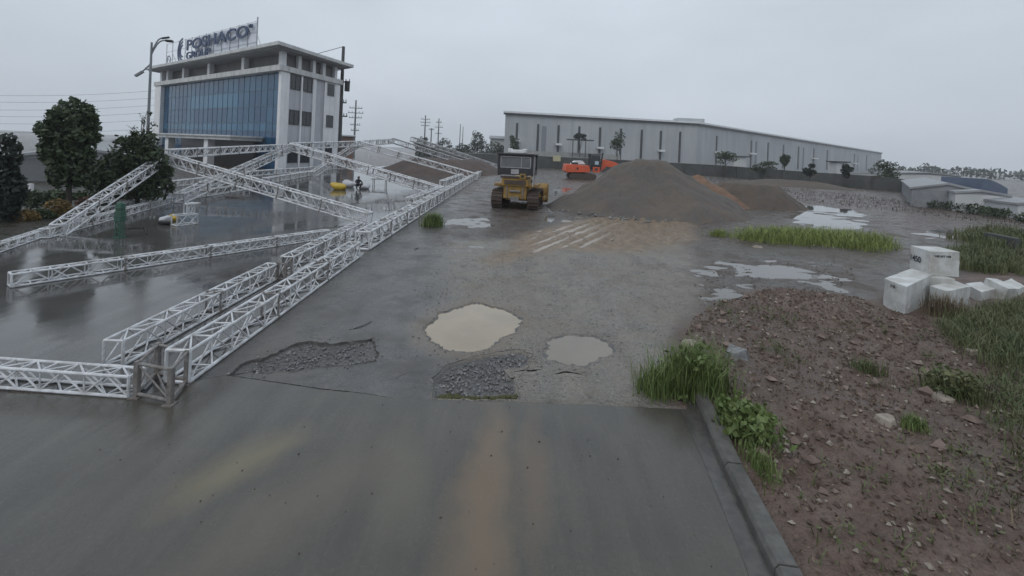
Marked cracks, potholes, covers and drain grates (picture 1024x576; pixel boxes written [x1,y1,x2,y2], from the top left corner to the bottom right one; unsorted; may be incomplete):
crack [215,376,385,397]
pothole [228,338,380,376]
pothole [421,302,524,354]
pothole [541,333,617,368]
crack [503,367,587,378]
pothole [430,349,533,401]
